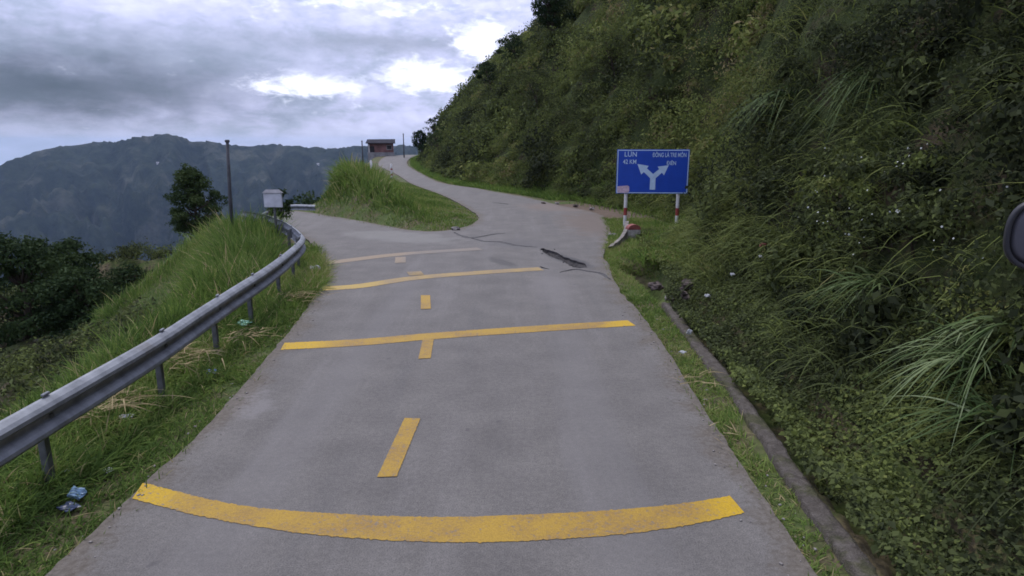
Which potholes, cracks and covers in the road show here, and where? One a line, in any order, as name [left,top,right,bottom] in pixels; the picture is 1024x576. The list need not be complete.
pothole [540,248,586,268]
crack [455,232,531,247]
crack [541,267,611,280]
